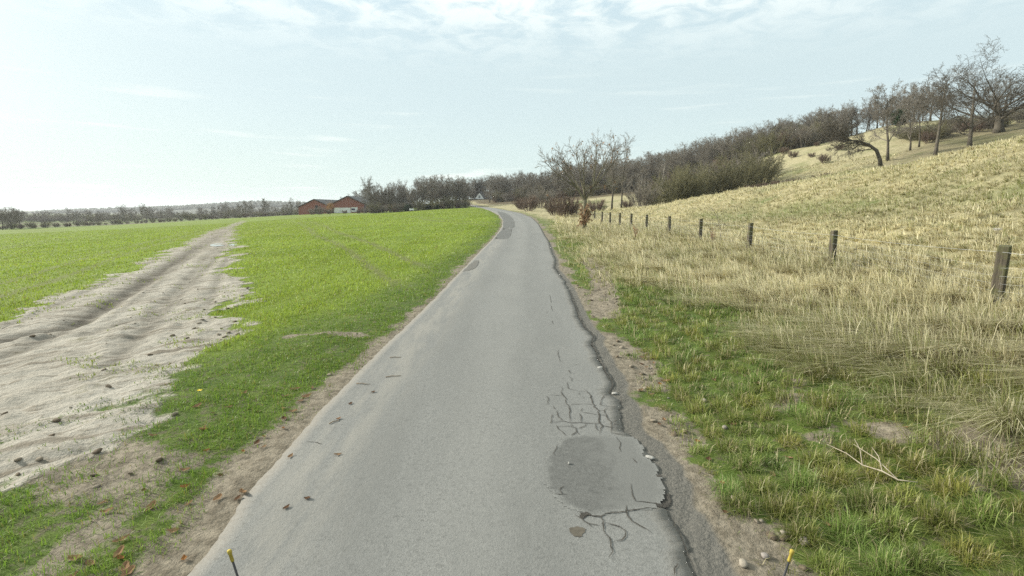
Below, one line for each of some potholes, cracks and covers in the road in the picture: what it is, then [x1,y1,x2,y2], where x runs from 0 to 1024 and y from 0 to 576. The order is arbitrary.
crack [576,487,696,575]
crack [547,292,637,463]
